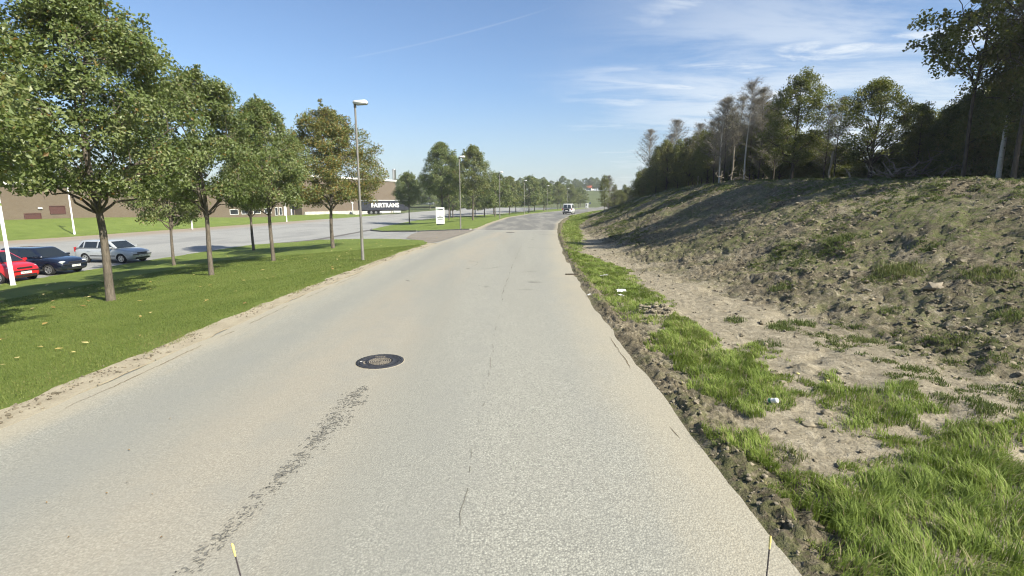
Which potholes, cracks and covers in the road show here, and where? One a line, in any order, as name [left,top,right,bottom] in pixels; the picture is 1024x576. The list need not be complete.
manhole cover [355,354,405,369]
crack [459,239,542,525]
